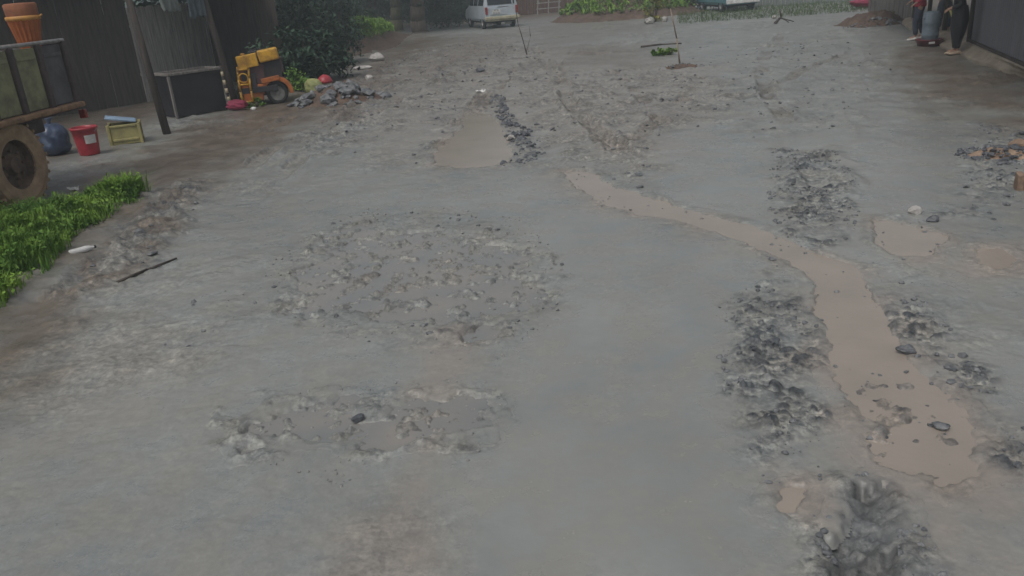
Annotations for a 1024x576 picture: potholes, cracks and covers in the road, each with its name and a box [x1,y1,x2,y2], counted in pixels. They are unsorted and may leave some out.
pothole [788,466,947,576]
pothole [552,167,1024,507]
pothole [424,94,550,170]
pothole [259,206,571,361]
pothole [208,381,517,487]
